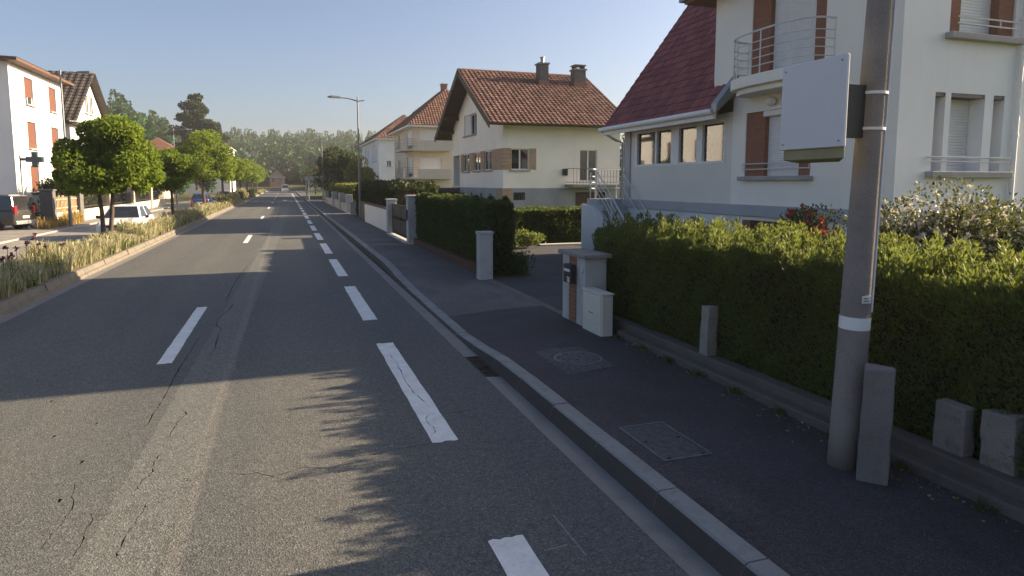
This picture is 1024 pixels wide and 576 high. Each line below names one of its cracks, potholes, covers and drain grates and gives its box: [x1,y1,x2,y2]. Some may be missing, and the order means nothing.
manhole cover [553,352,603,365]
crack [210,263,250,354]
drain grate [465,356,500,377]
crack [42,483,93,557]
manhole cover [618,421,713,462]
crack [115,456,159,559]
